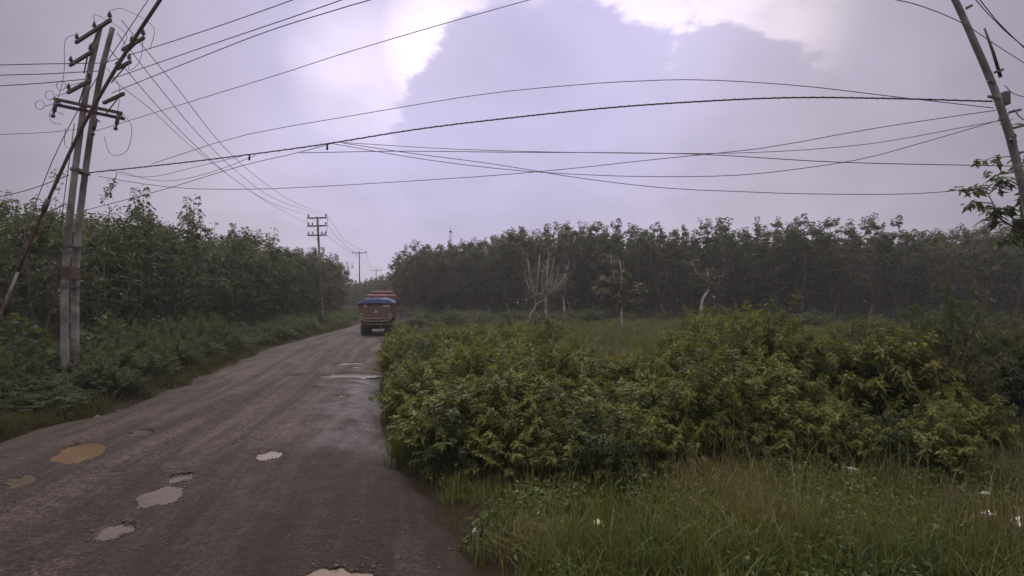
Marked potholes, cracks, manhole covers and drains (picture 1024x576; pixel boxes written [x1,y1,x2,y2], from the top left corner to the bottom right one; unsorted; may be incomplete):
pothole [0,472,44,490]
pothole [81,517,147,543]
pothole [254,448,288,462]
pothole [298,560,396,576]
pothole [162,469,201,483]
pothole [311,371,383,380]
pothole [131,483,188,512]
pothole [43,441,110,467]
pothole [125,426,156,438]
